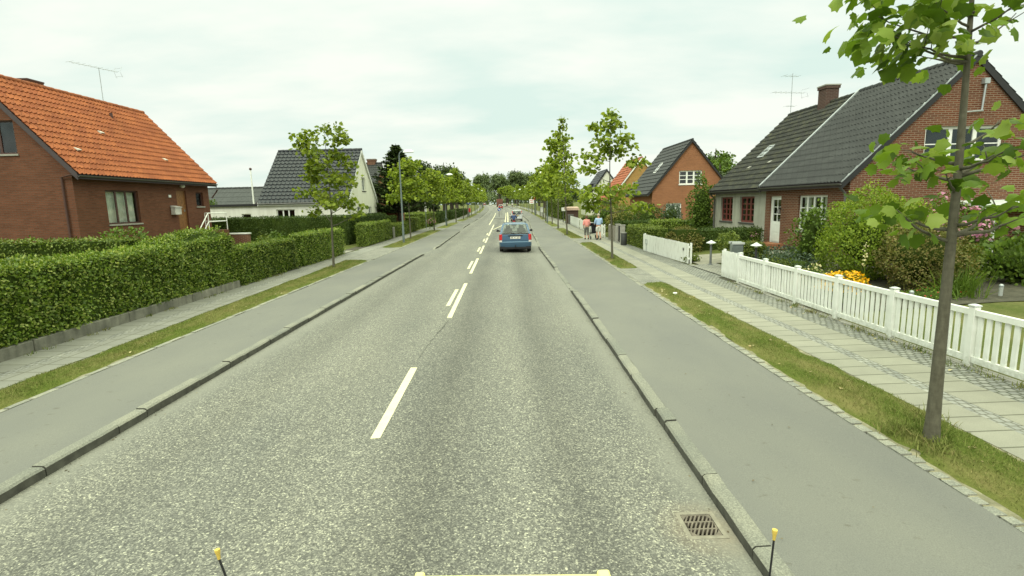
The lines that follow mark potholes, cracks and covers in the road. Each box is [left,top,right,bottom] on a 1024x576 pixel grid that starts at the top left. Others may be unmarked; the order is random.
drain grate [674,511,730,539]
